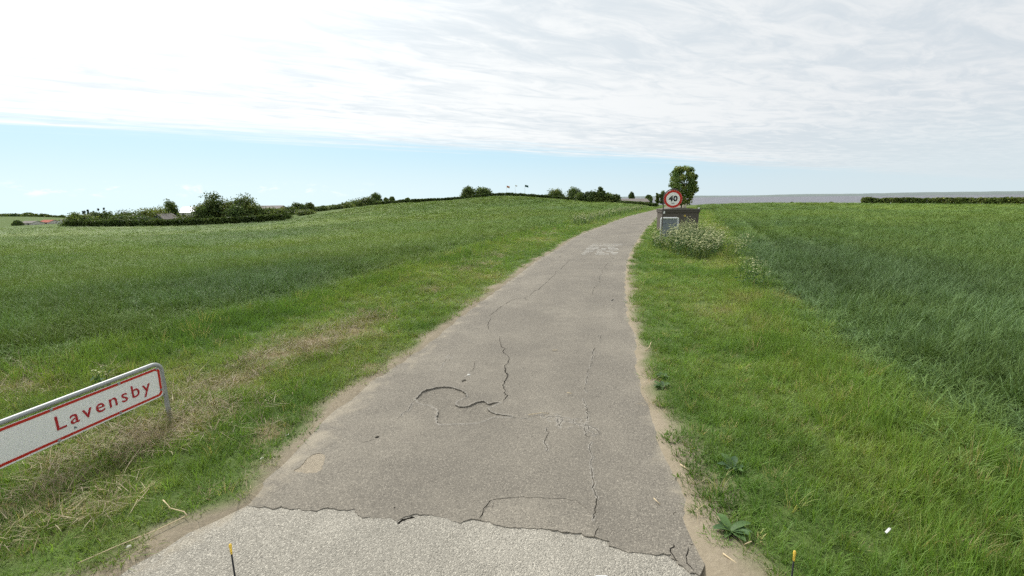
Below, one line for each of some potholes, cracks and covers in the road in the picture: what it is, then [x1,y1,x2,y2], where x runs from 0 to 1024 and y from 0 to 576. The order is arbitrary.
crack [480,256,602,536]
crack [670,543,693,569]
